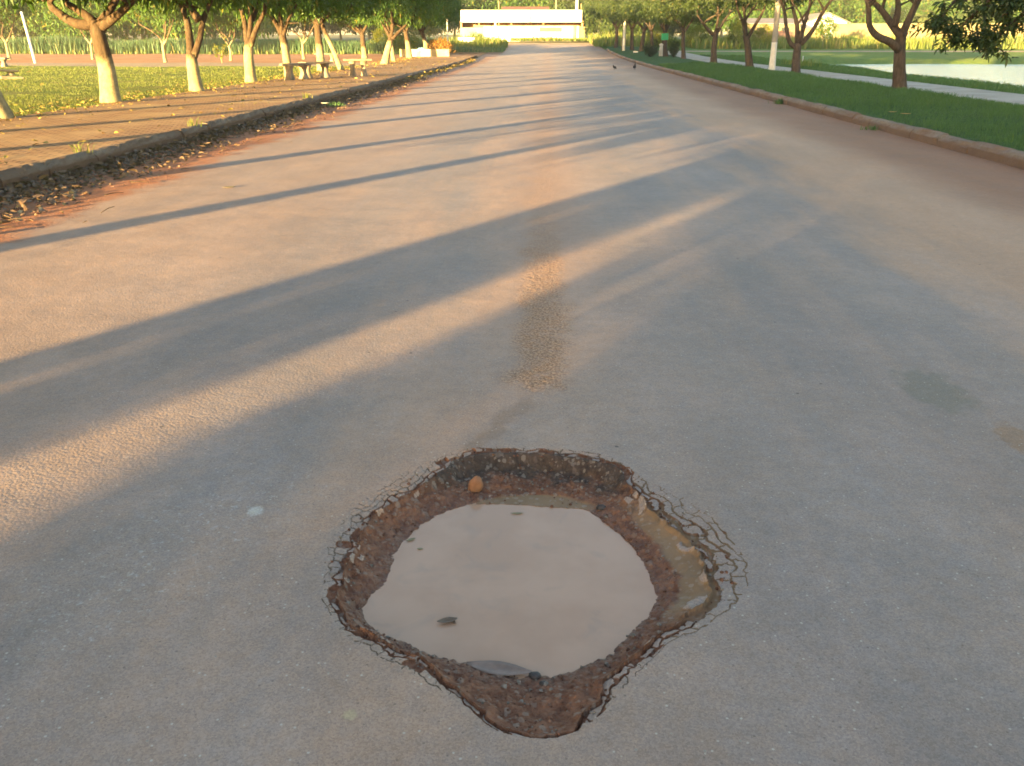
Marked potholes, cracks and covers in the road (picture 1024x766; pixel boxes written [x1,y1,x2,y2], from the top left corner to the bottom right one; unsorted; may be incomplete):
pothole [322,447,736,739]
